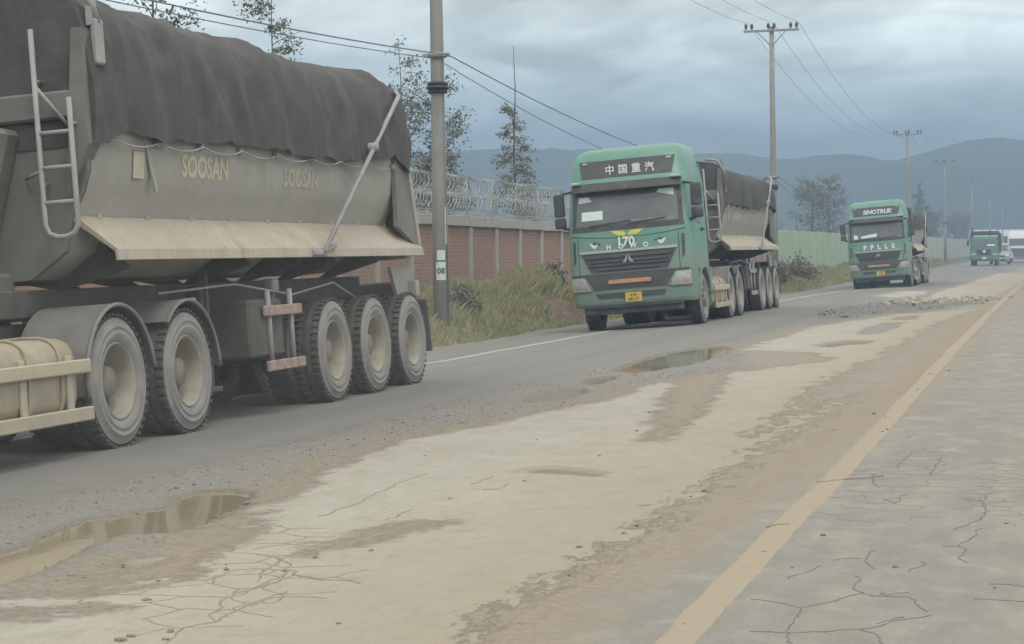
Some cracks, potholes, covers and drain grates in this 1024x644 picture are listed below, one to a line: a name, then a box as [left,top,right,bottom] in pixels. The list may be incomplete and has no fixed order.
pothole [839,321,920,336]
pothole [798,340,891,349]
pothole [0,486,288,597]
pothole [597,345,744,374]
crack [974,584,1024,602]
pothole [478,464,645,482]
crack [816,447,1024,571]
crack [749,550,931,644]
crack [21,474,426,643]
